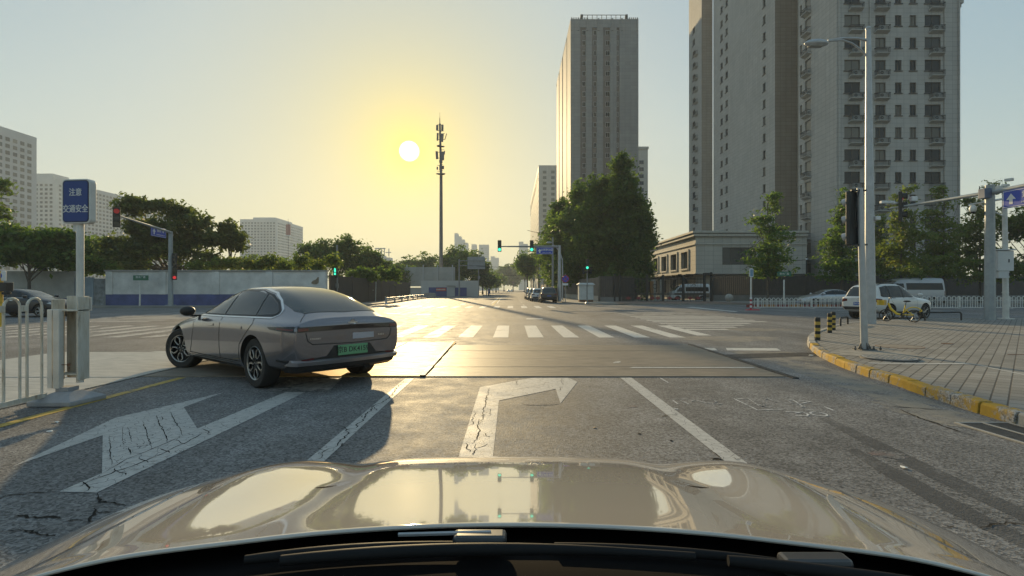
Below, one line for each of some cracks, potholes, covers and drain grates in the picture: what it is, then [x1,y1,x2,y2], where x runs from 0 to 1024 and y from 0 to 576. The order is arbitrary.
crack [316,382,403,460]
crack [466,391,491,455]
crack [0,412,211,539]
drain grate [954,422,1024,445]
